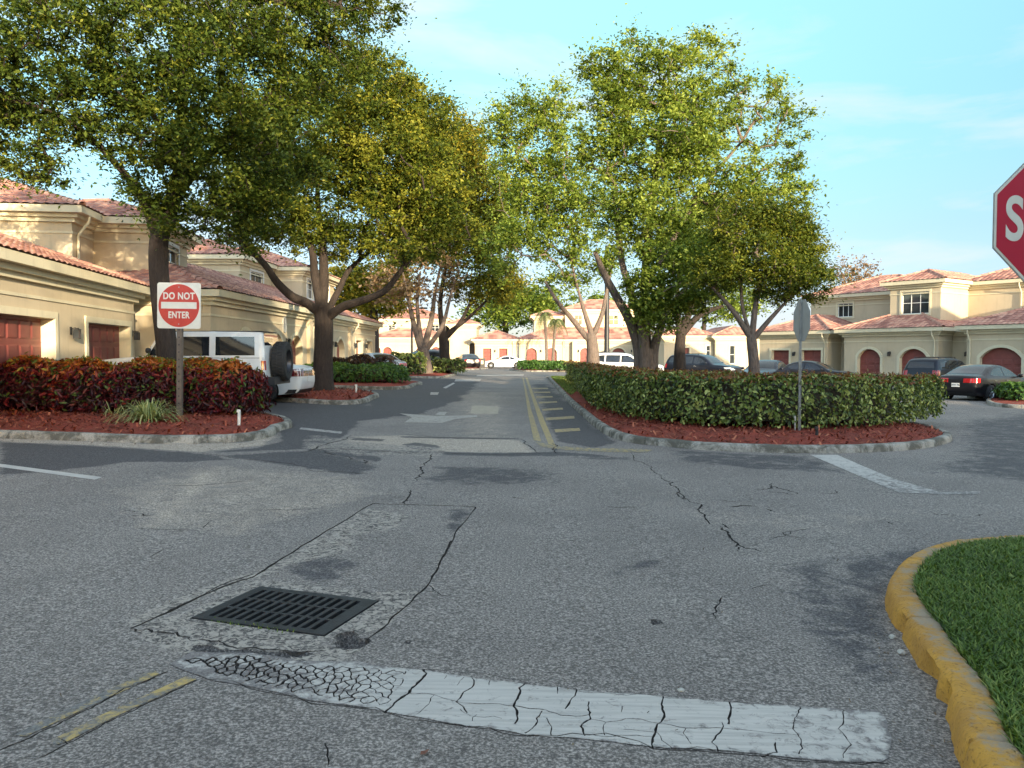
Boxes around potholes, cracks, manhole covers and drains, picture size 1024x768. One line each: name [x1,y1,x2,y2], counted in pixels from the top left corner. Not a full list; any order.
crack [633,455,805,552]
pothole [333,630,372,650]
crack [402,454,432,504]
crack [0,628,890,765]
drain grate [190,586,379,637]
